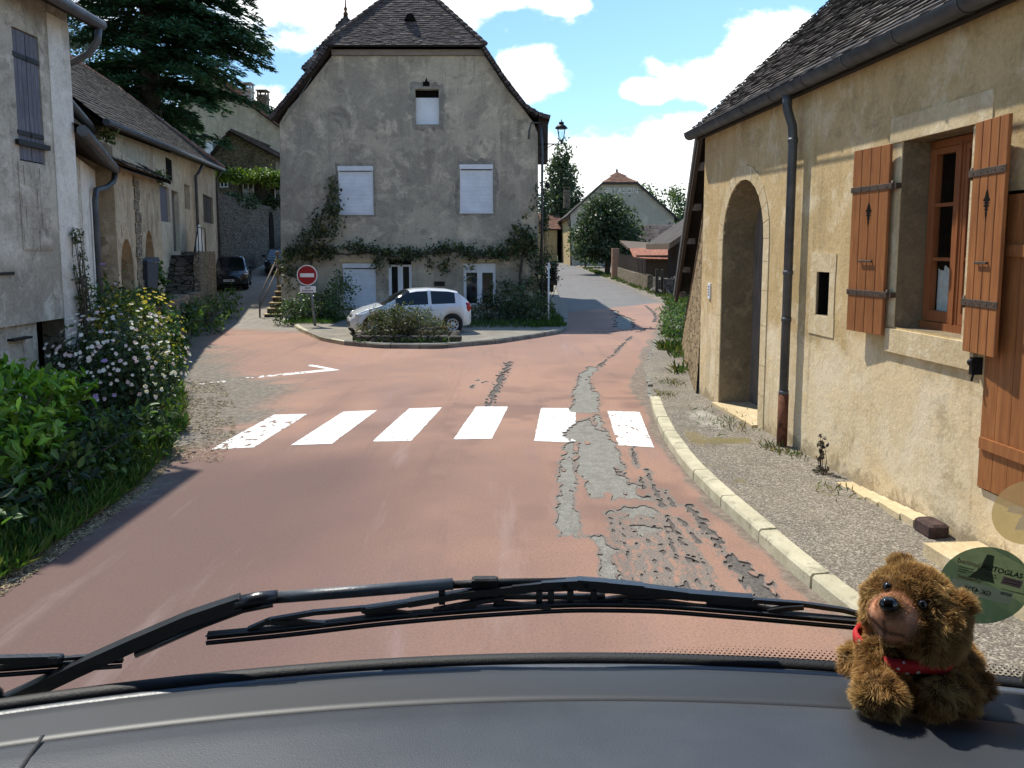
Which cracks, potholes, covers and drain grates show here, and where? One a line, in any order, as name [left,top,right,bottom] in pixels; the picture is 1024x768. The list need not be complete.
pothole [563,367,651,500]
pothole [605,505,658,518]
pothole [555,442,581,537]
pothole [630,525,662,537]
crack [596,305,658,367]
crack [470,361,514,407]
